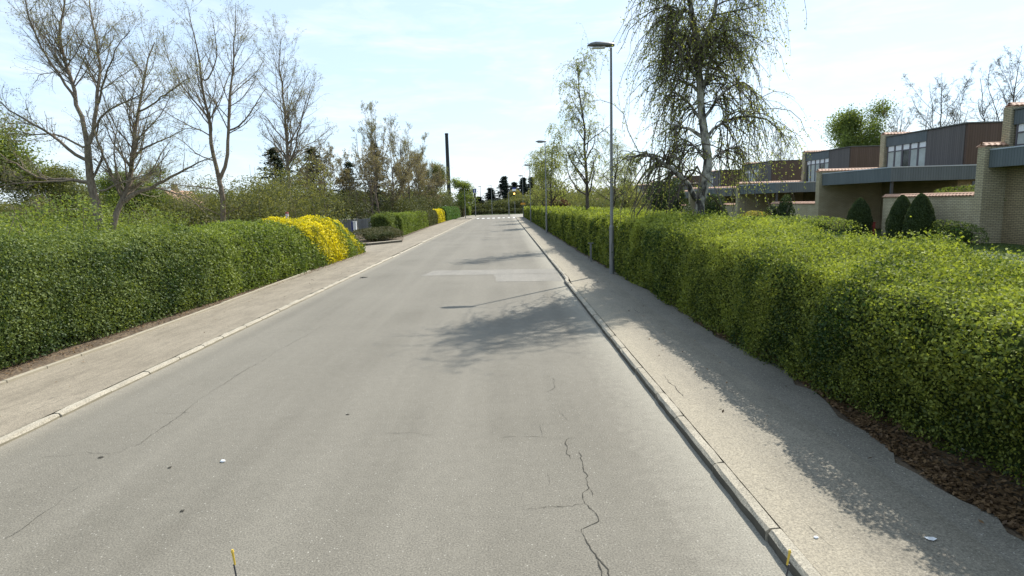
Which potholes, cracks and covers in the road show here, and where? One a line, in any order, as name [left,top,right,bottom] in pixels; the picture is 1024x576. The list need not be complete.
crack [496,427,610,576]
